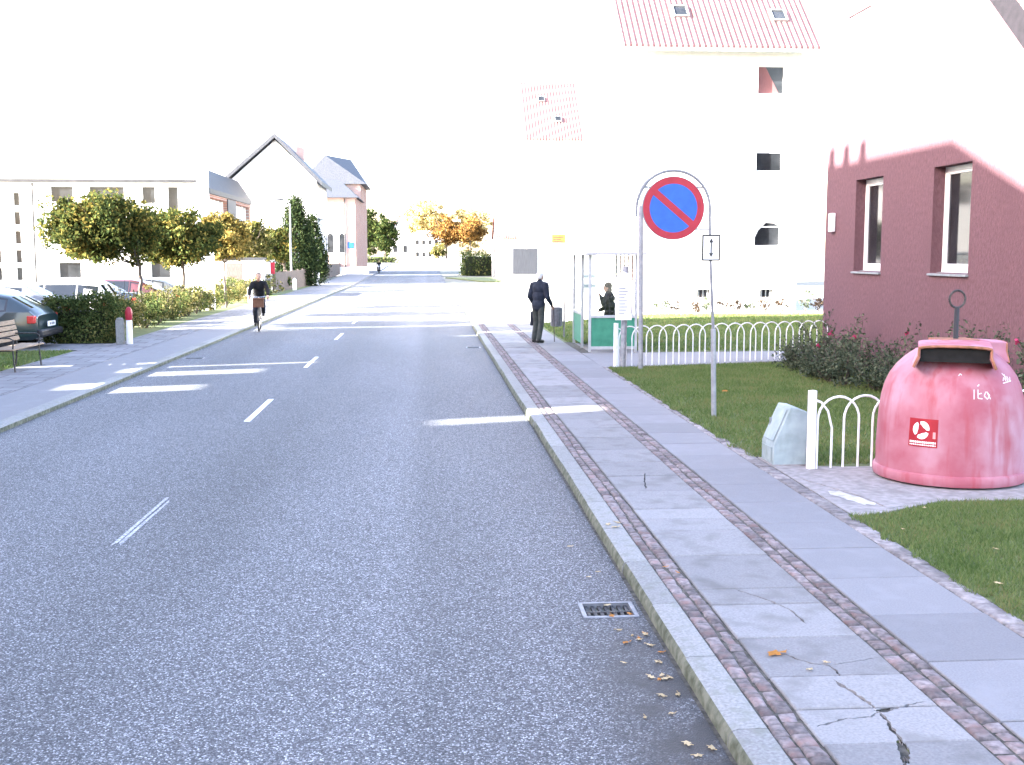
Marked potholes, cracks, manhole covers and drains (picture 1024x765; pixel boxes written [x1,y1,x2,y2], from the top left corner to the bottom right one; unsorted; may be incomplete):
drain grate [577,601,640,618]
